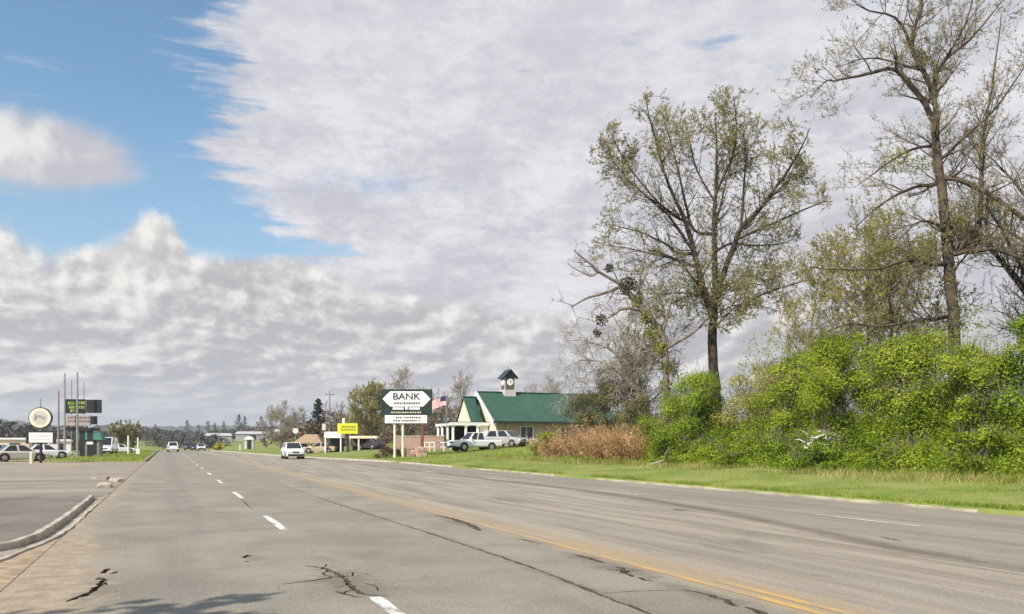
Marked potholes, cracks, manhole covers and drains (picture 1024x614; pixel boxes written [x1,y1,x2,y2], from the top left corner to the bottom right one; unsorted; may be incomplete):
crack [66,568,118,602]
crack [281,484,664,614]
